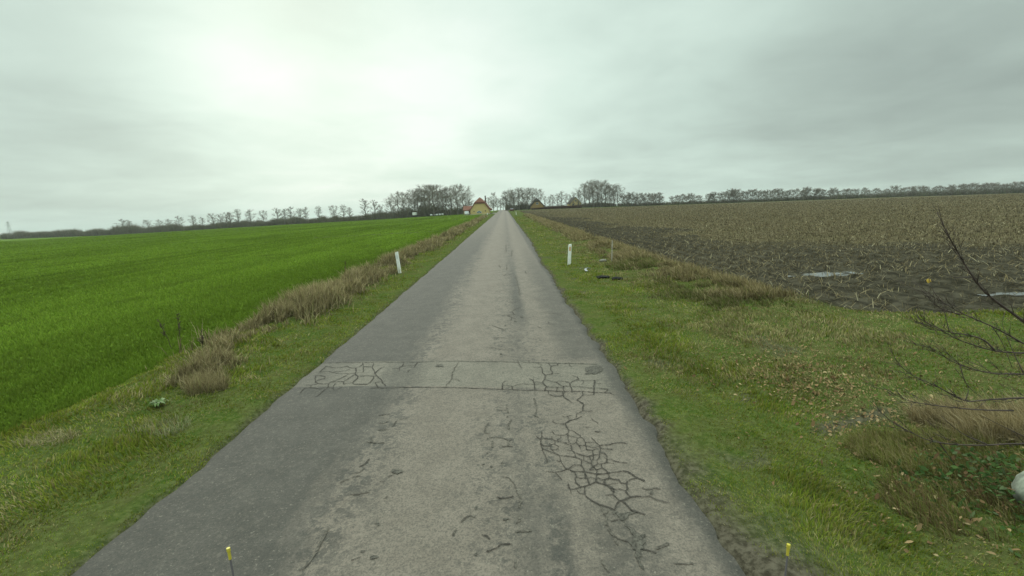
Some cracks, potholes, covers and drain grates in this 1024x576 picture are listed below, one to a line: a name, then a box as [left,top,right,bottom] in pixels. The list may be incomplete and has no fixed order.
crack [300,244,693,571]
